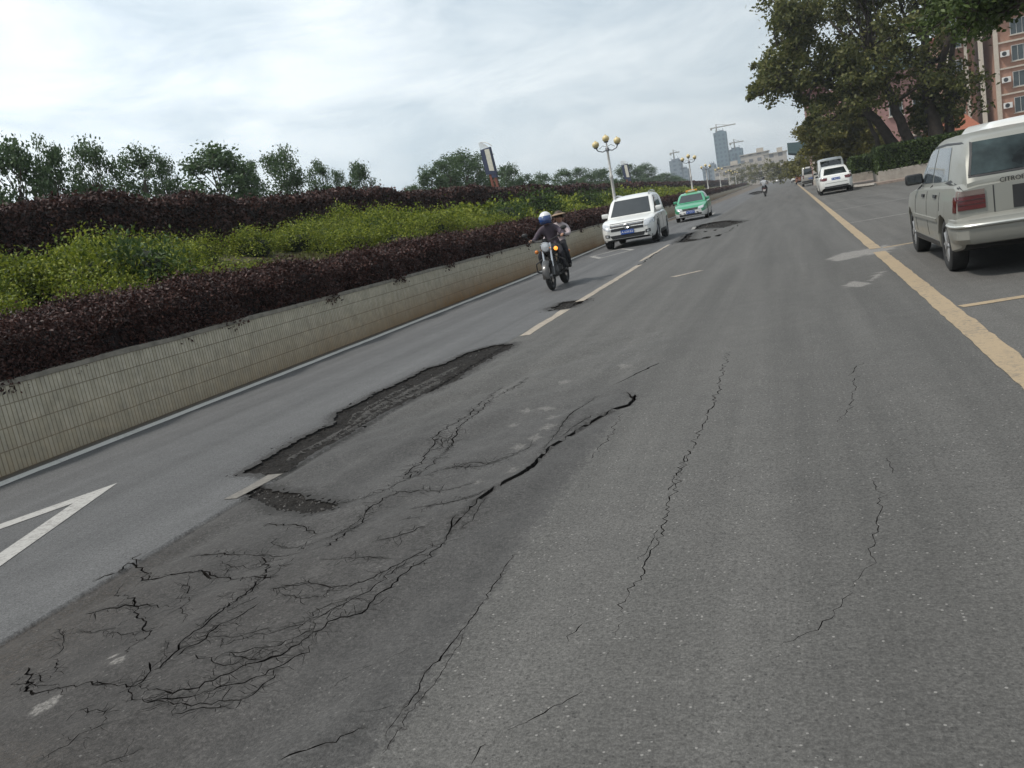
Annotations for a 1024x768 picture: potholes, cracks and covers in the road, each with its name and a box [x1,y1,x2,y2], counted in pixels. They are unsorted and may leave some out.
crack [7,378,532,766]
pothole [696,220,743,229]
crack [444,363,659,542]
pothole [225,344,513,477]
pothole [245,486,339,516]
crack [779,458,893,646]
crack [615,353,729,635]
pothole [548,300,594,311]
crack [511,691,583,729]
